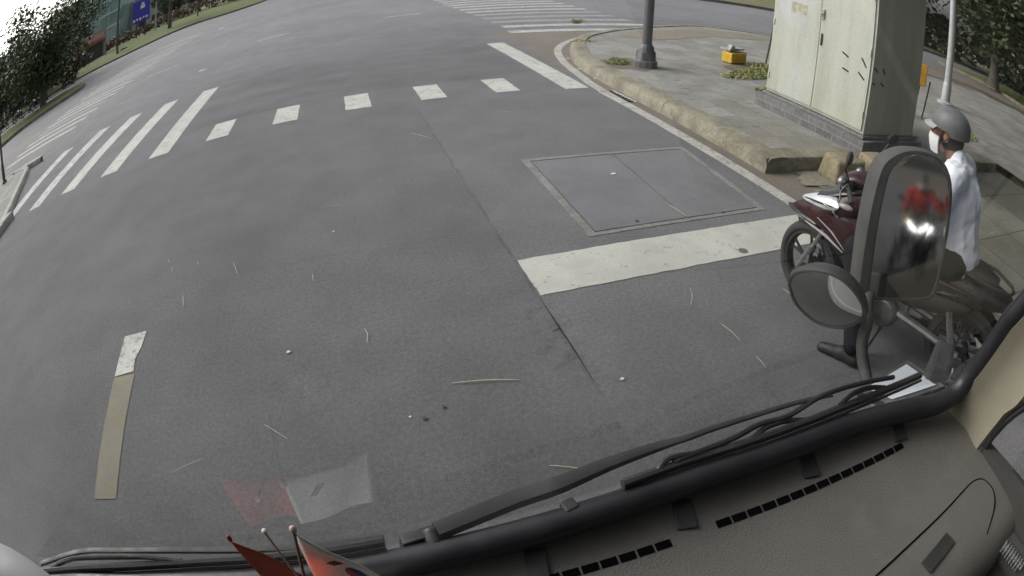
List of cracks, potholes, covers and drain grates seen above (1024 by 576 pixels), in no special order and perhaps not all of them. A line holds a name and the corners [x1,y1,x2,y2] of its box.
manhole cover [521,147,766,237]
drain grate [598,90,638,103]
